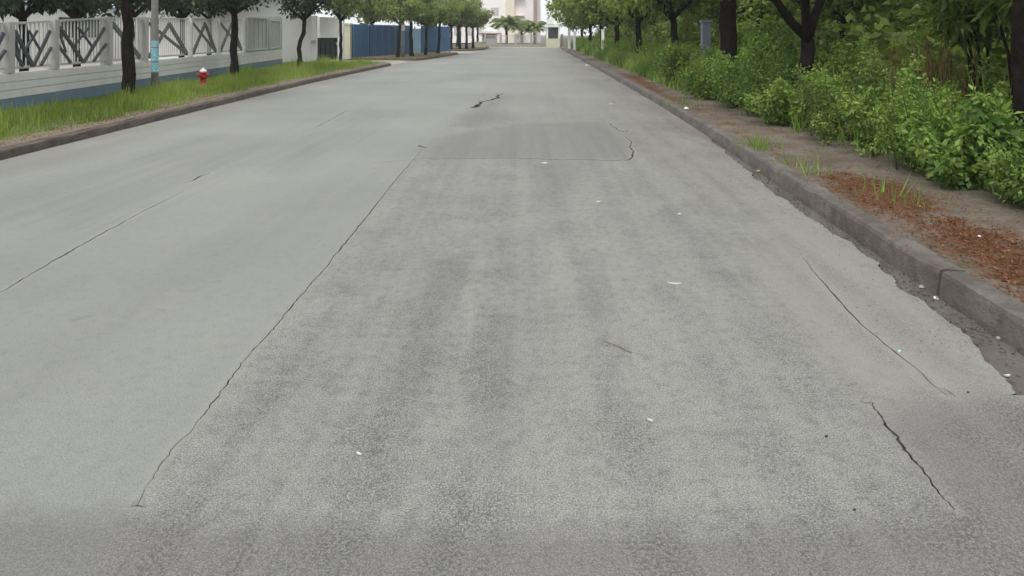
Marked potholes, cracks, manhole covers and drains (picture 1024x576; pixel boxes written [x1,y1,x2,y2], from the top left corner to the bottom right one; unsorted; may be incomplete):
crack [132,123,634,507]
crack [471,94,501,108]
crack [803,258,955,510]
